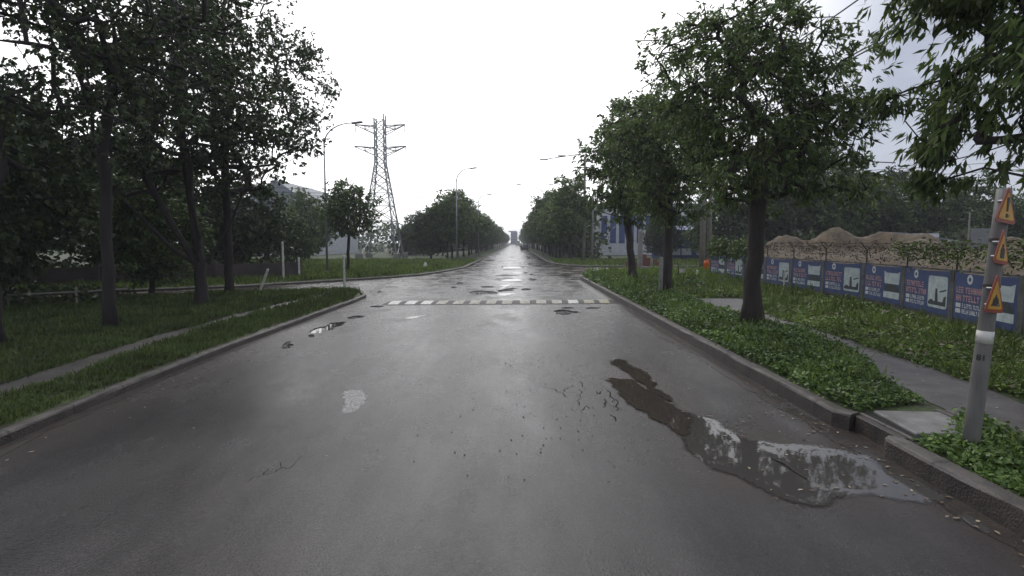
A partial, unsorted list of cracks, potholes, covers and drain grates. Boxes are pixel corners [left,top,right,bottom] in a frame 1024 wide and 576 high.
crack [545,381,619,422]
pothole [309,322,346,333]
